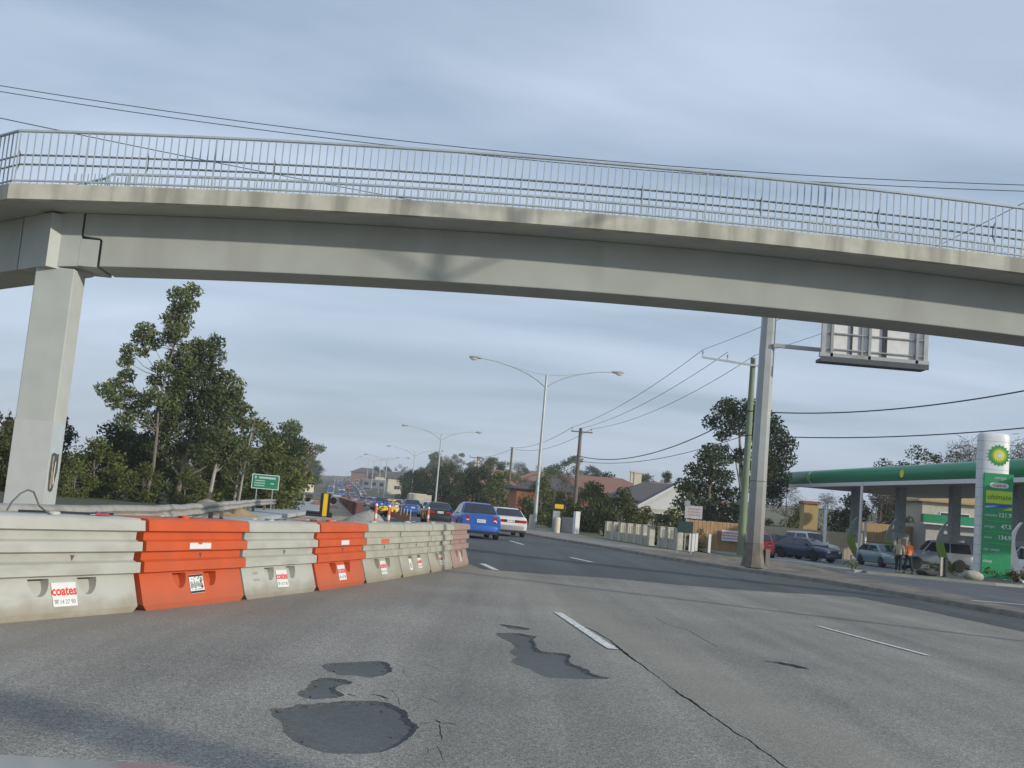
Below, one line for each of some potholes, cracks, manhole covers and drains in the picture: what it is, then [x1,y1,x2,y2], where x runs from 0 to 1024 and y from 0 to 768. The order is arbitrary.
crack [348,666,456,759]
crack [585,619,787,768]
